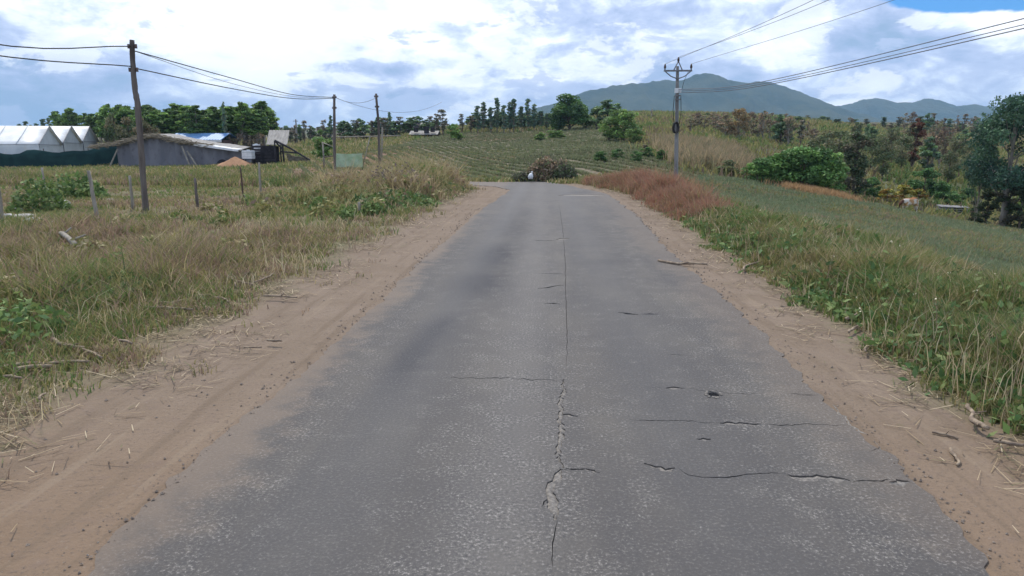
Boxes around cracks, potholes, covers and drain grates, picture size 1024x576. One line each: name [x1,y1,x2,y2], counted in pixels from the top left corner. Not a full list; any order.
crack [546,213,597,557]
crack [646,464,910,487]
